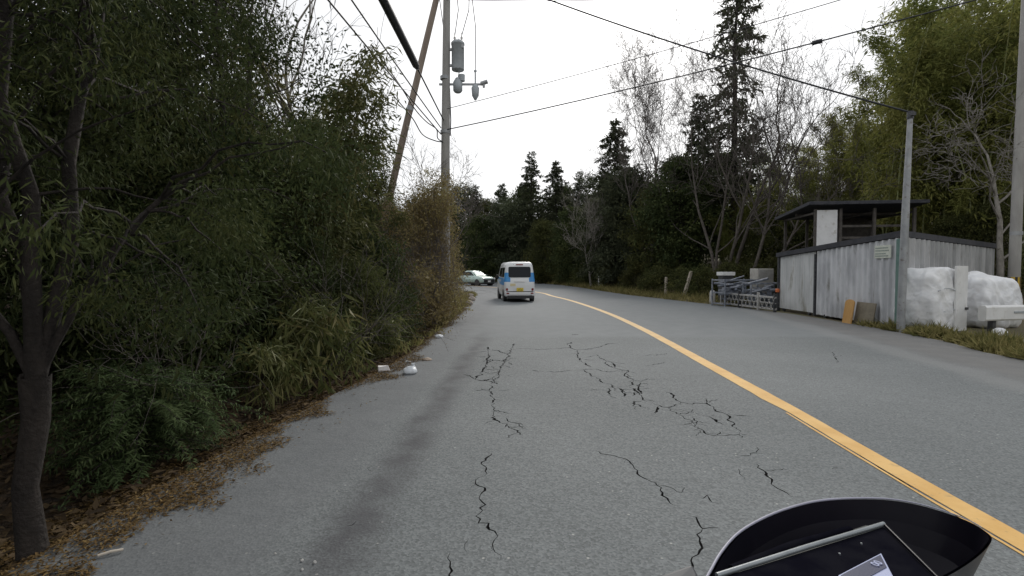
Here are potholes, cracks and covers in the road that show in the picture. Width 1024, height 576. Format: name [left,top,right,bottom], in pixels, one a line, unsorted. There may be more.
crack [598,451,718,568]
crack [471,455,500,555]
crack [463,334,751,438]
crack [739,449,794,497]
